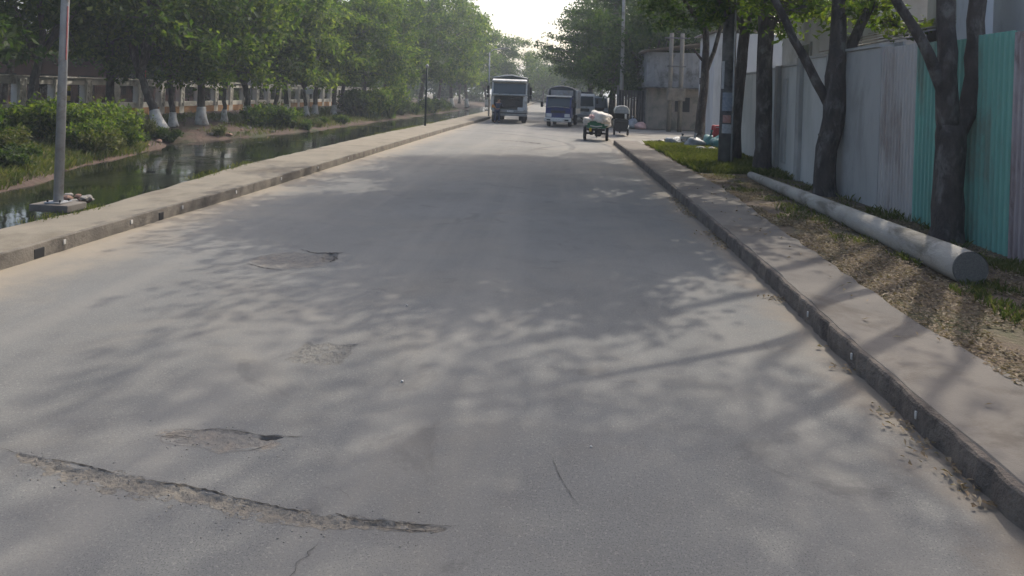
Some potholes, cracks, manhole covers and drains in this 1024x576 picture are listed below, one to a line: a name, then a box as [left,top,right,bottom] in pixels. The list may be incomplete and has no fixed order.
pothole [155,428,300,454]
pothole [285,342,359,365]
pothole [7,449,447,533]
pothole [248,250,343,270]
